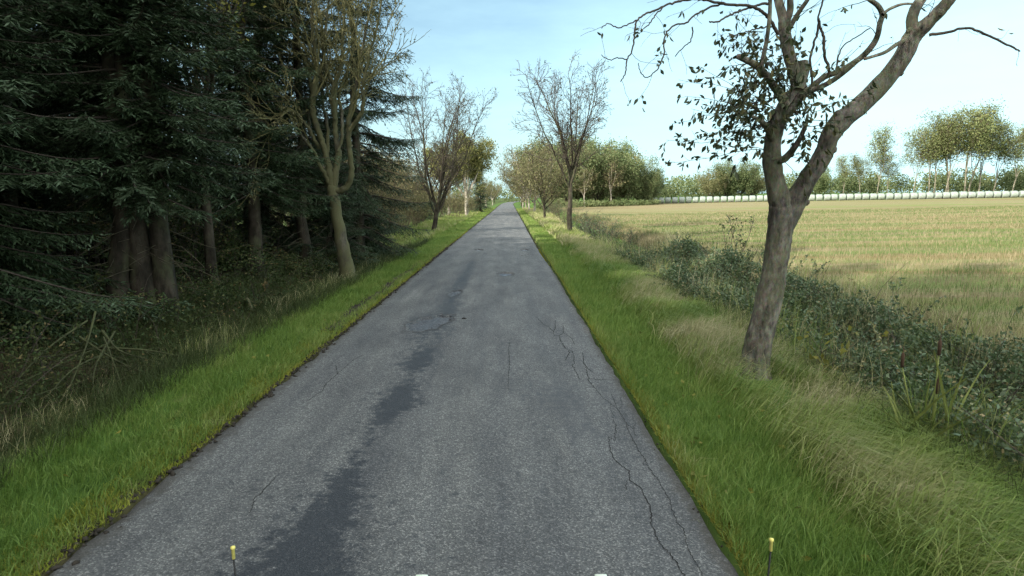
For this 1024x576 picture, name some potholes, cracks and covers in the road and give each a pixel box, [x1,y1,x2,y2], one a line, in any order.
crack [536,317,702,576]
